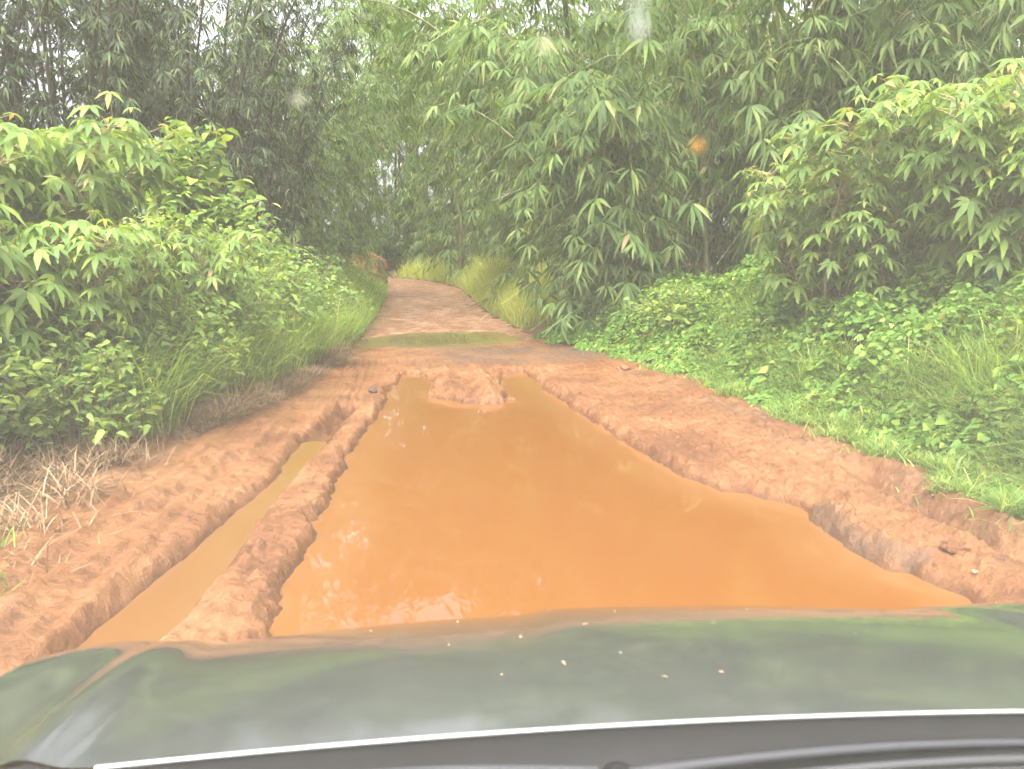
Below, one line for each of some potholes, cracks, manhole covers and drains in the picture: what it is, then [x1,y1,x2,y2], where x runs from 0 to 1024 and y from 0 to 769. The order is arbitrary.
pothole [216,365,1024,642]
pothole [353,331,529,349]
